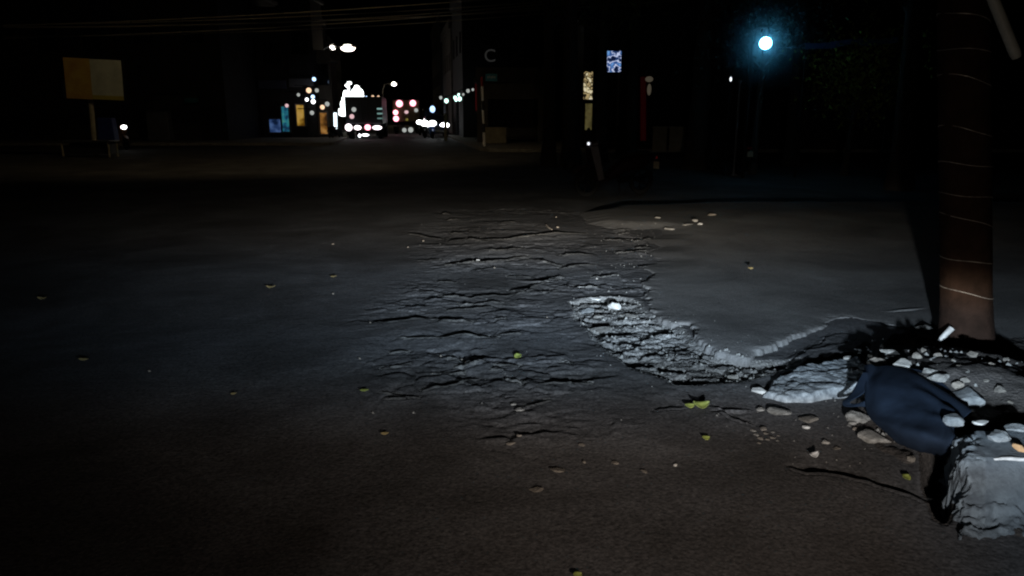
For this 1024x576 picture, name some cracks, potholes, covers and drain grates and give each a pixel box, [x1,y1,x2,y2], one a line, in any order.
pothole [568,296,804,386]
crack [373,212,653,408]
crack [786,465,933,503]
